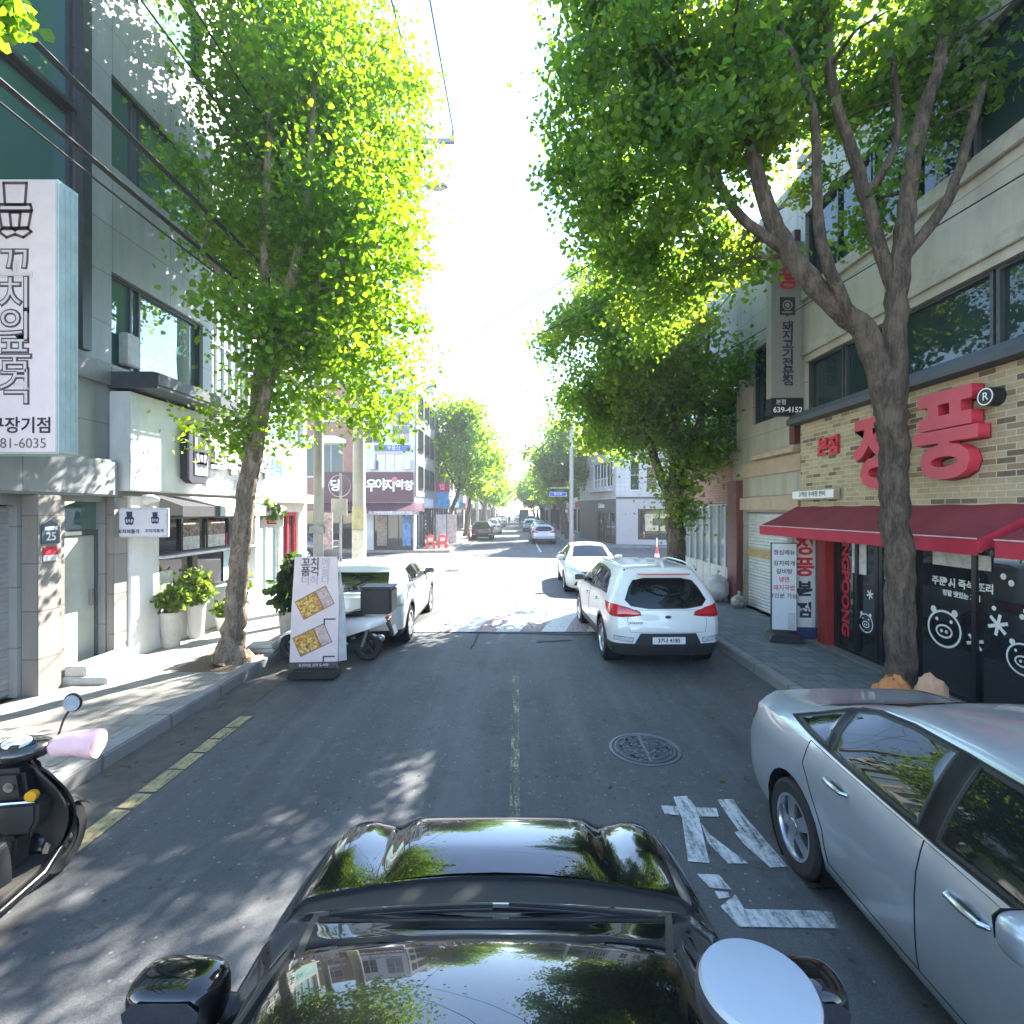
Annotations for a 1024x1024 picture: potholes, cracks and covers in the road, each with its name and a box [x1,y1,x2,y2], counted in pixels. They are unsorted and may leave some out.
manhole cover [609,733,682,766]
